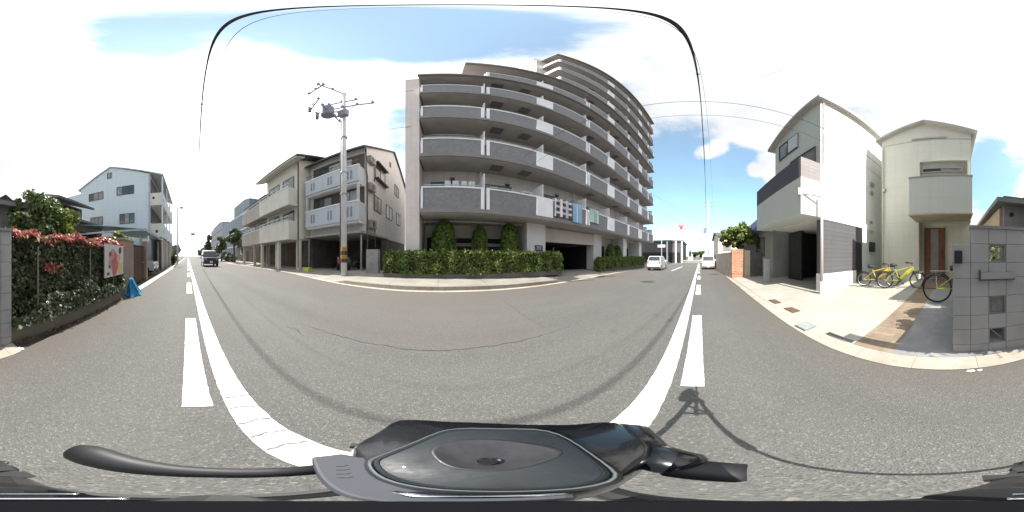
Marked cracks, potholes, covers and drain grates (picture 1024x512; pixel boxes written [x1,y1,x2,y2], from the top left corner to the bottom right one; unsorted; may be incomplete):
crack [287,324,557,351]
